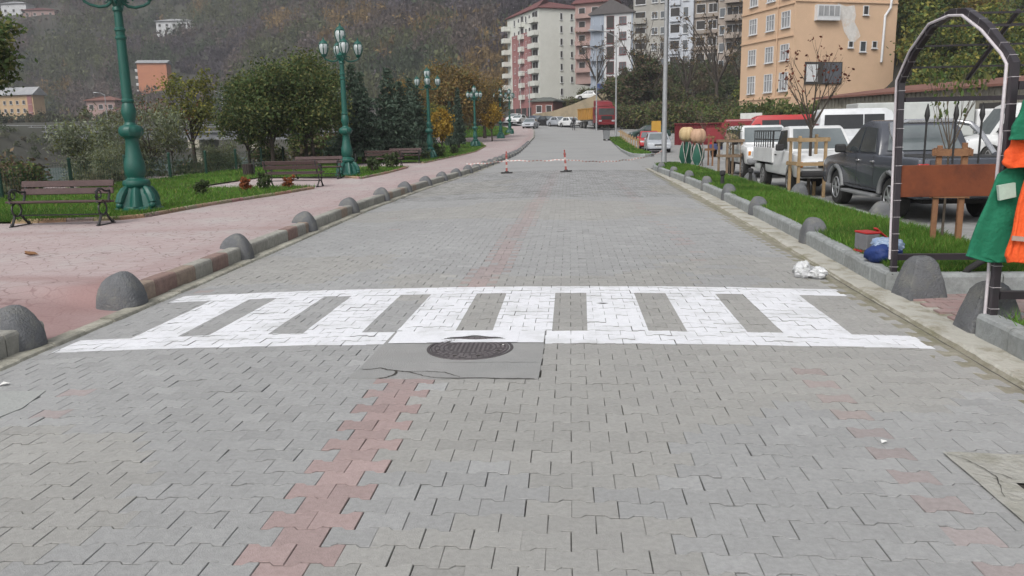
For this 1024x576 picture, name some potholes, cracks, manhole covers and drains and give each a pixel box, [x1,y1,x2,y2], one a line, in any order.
crack [374,368,516,379]
crack [947,453,1023,499]
manhole cover [427,337,513,360]
